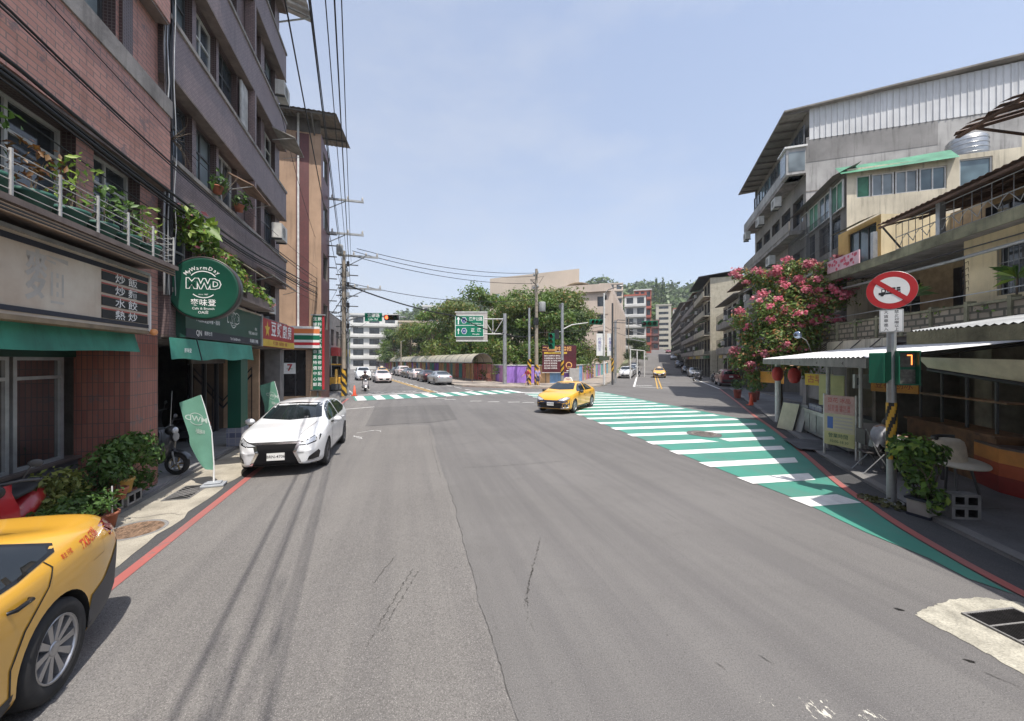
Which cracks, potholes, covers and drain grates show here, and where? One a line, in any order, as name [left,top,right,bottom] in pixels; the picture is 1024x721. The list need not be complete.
manhole cover [114,519,169,541]
crack [367,558,418,646]
drain grate [160,485,205,502]
drain grate [961,607,1024,645]
